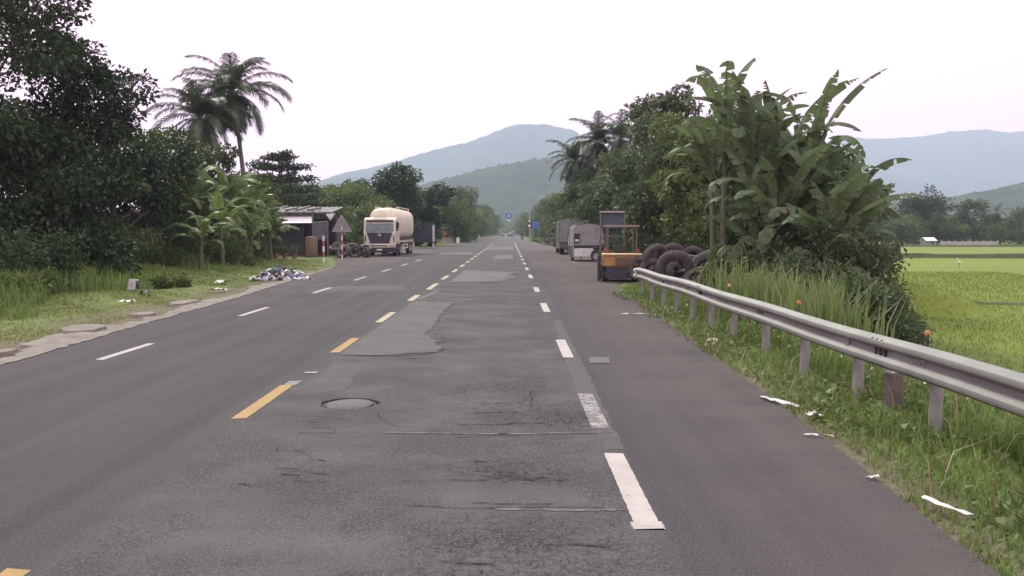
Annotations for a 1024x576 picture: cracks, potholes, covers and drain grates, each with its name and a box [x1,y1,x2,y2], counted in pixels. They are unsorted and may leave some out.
crack [239,369,604,485]
manhole cover [322,399,376,409]
